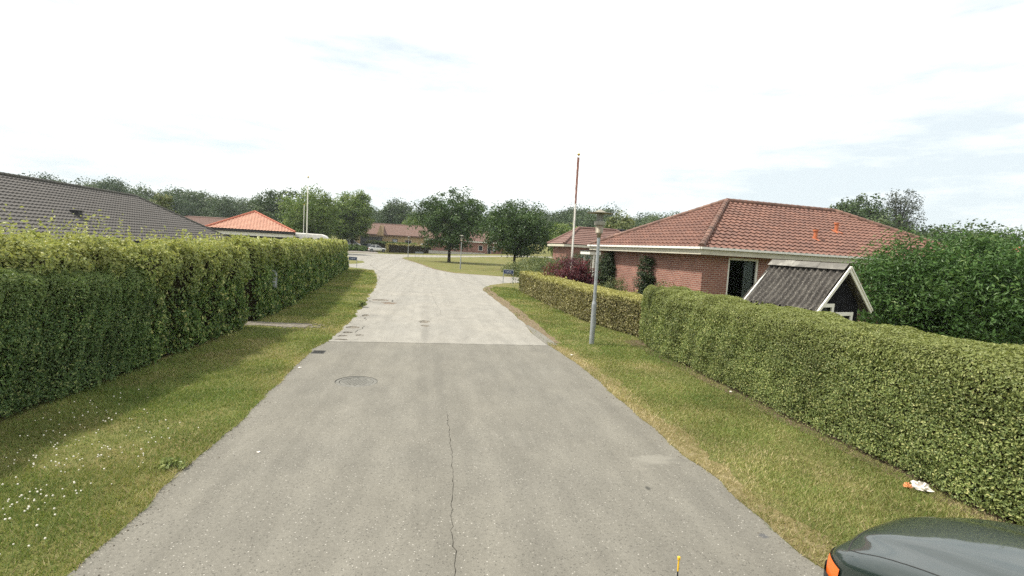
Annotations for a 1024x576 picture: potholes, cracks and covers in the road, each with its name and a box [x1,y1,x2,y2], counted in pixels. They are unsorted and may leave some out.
crack [447,414,457,576]
manhole cover [335,376,378,387]
